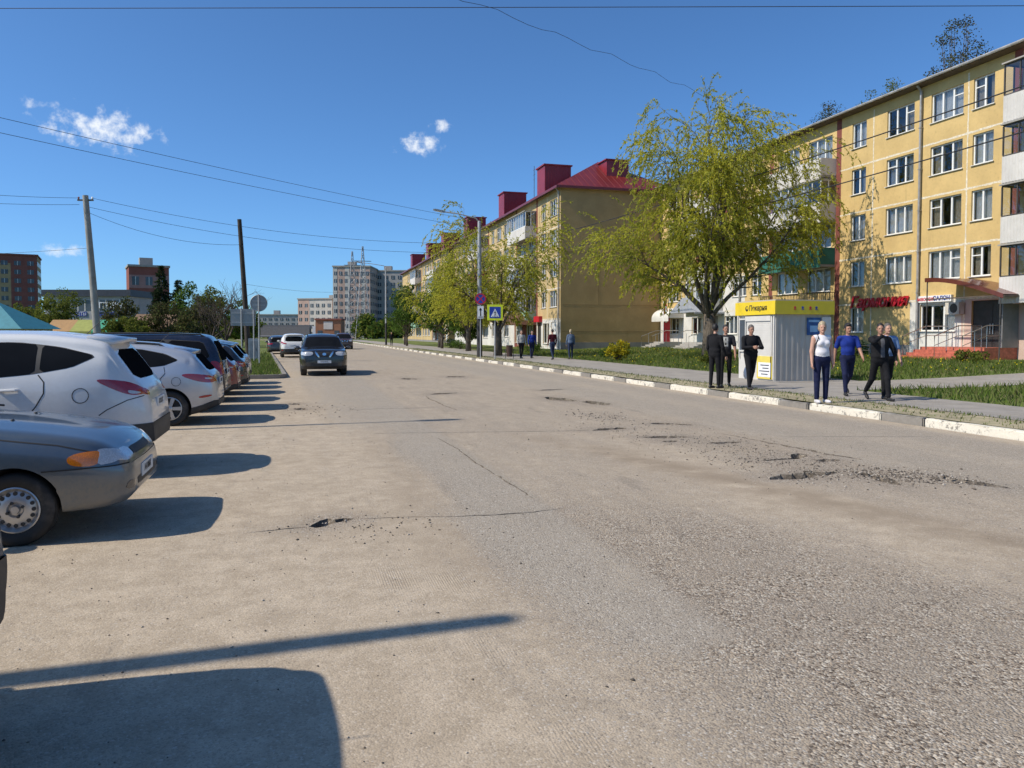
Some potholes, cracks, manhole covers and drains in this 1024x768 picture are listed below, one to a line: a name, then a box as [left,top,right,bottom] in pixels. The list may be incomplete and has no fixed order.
pothole [944,477,1013,489]
pothole [309,518,353,528]
pothole [770,471,840,480]
pothole [851,471,901,485]
crack [250,431,563,533]
